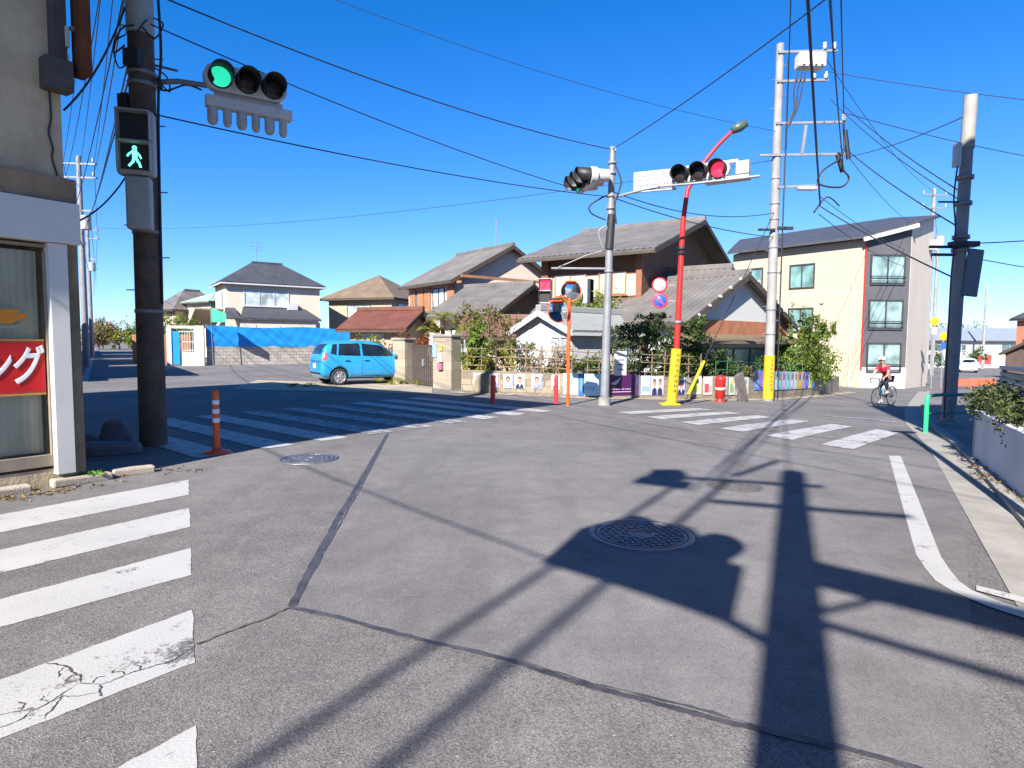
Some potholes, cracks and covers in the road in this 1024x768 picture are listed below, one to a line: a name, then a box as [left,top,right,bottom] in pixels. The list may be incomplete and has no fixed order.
manhole cover [706,480,763,493]
crack [0,647,193,727]
manhole cover [589,519,695,552]
manhole cover [278,453,339,465]
